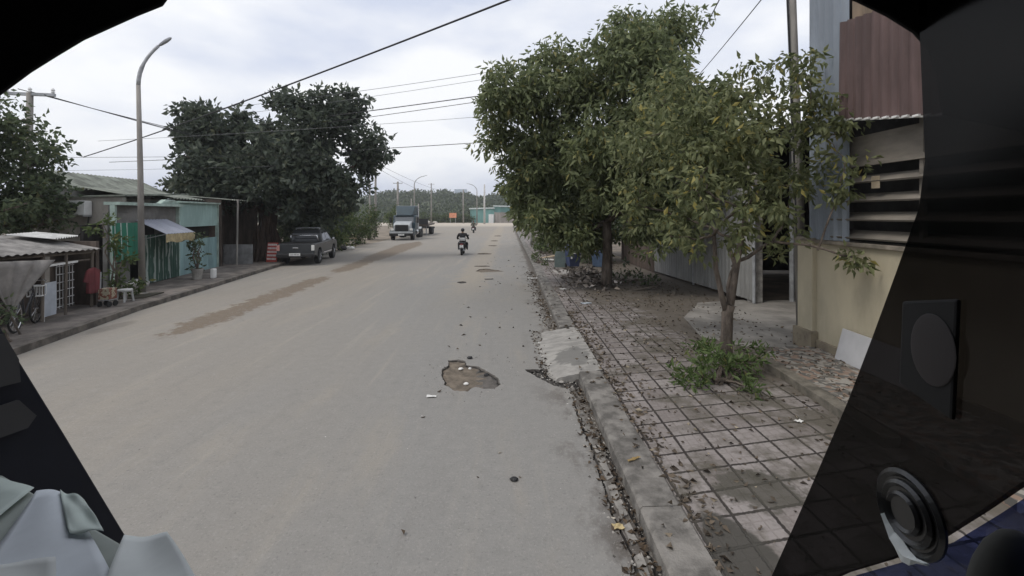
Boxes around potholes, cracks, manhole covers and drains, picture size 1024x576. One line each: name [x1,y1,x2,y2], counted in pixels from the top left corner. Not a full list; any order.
pothole [441,359,501,392]
